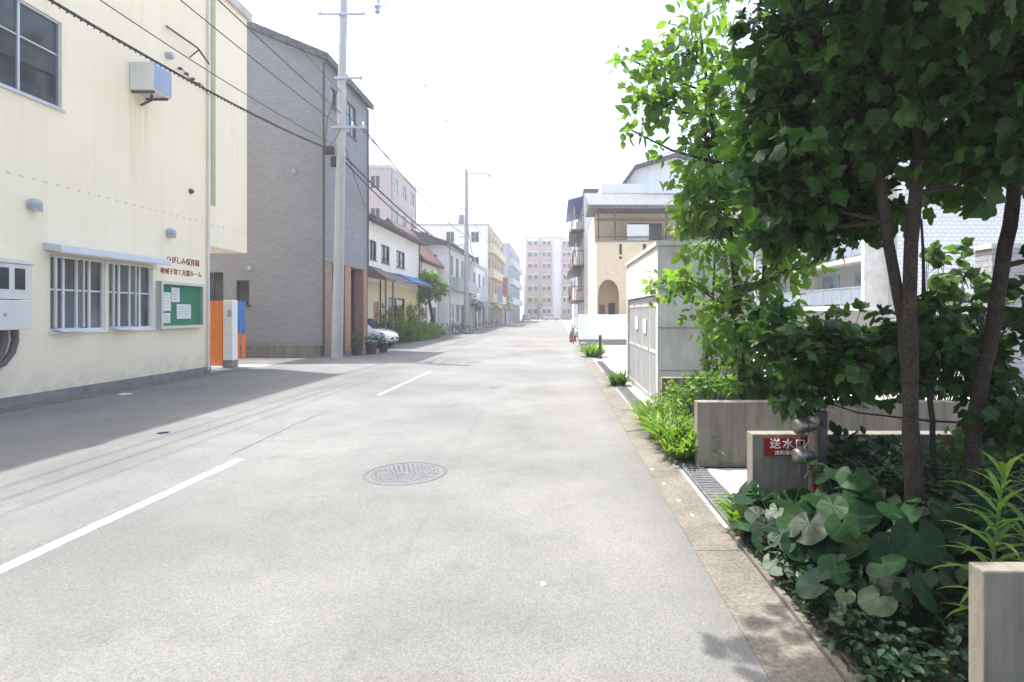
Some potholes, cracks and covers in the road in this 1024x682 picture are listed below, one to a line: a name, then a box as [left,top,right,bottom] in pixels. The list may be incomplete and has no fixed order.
manhole cover [362,462,447,486]
